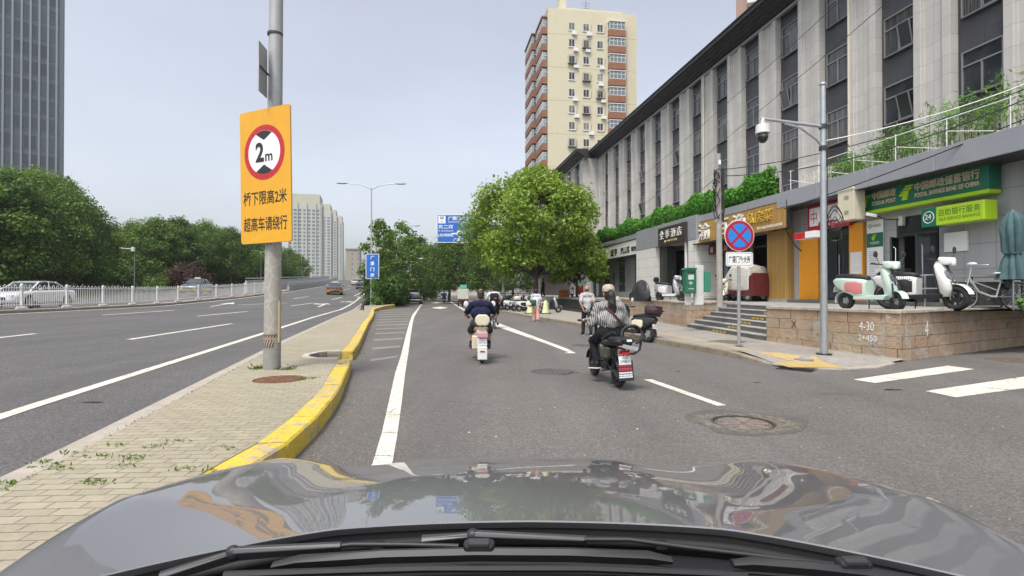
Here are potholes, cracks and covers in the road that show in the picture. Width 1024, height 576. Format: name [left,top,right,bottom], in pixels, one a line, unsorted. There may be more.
manhole cover [252,375,307,384]
manhole cover [684,409,808,436]
